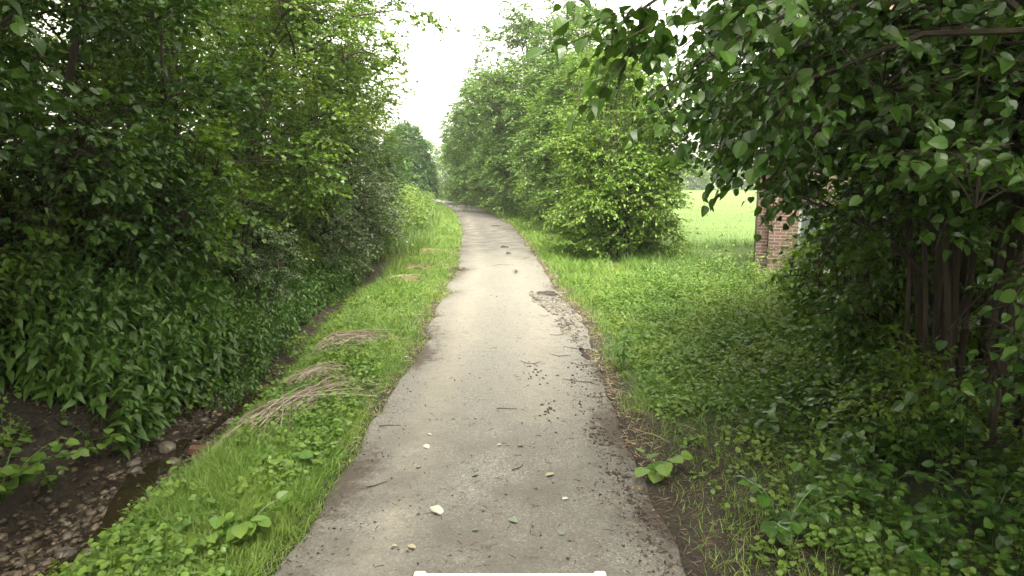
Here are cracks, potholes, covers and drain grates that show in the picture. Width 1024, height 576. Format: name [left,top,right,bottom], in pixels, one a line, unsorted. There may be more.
pothole [534,290,563,298]
pothole [575,347,600,363]
